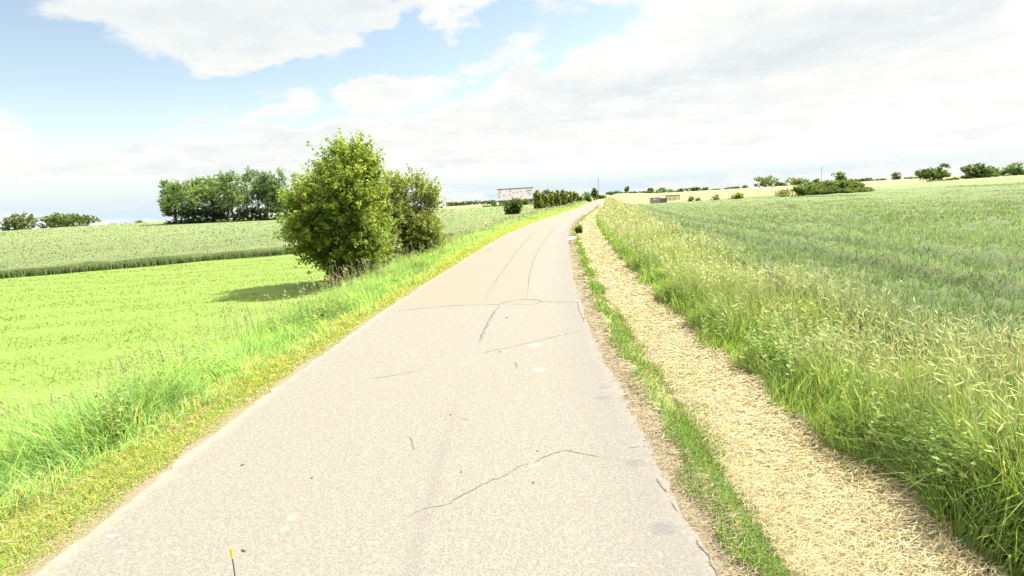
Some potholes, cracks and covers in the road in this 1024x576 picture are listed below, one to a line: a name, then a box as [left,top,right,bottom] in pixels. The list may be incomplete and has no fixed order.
crack [407,450,608,518]
